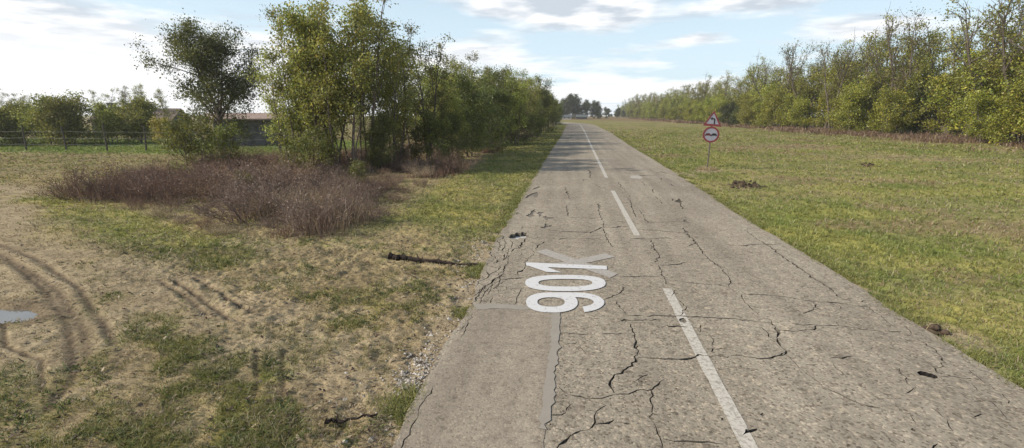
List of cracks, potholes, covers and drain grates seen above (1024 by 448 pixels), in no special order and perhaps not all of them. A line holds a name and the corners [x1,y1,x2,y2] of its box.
crack [458,170,1010,448]
